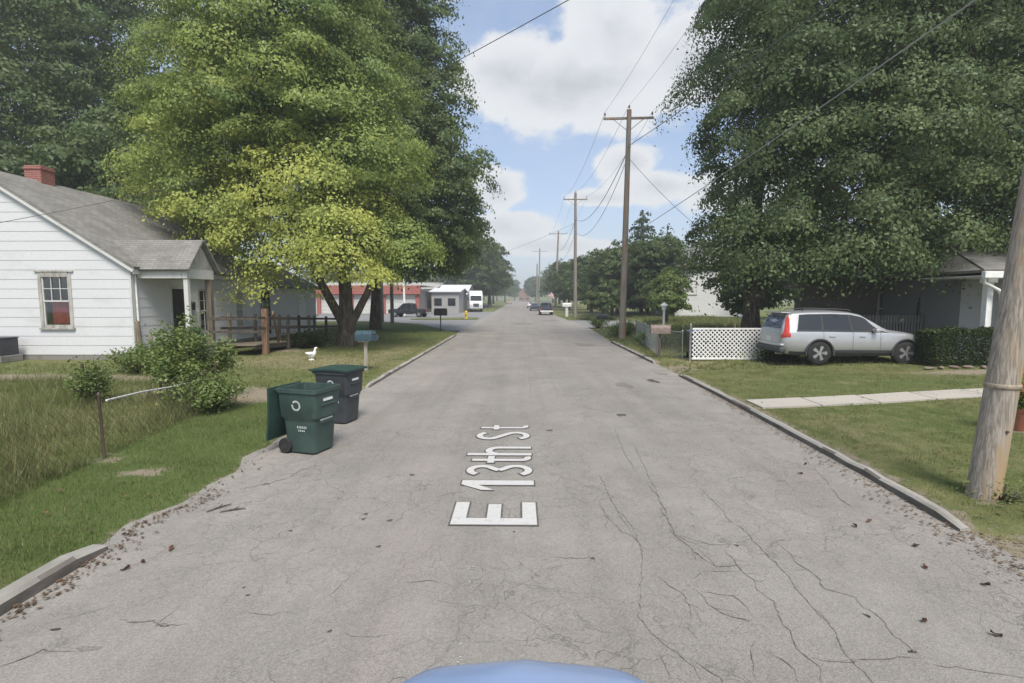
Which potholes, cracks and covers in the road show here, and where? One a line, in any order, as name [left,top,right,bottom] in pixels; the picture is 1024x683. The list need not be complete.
crack [595,431,1018,683]
crack [43,602,186,626]
crack [1,649,83,666]
